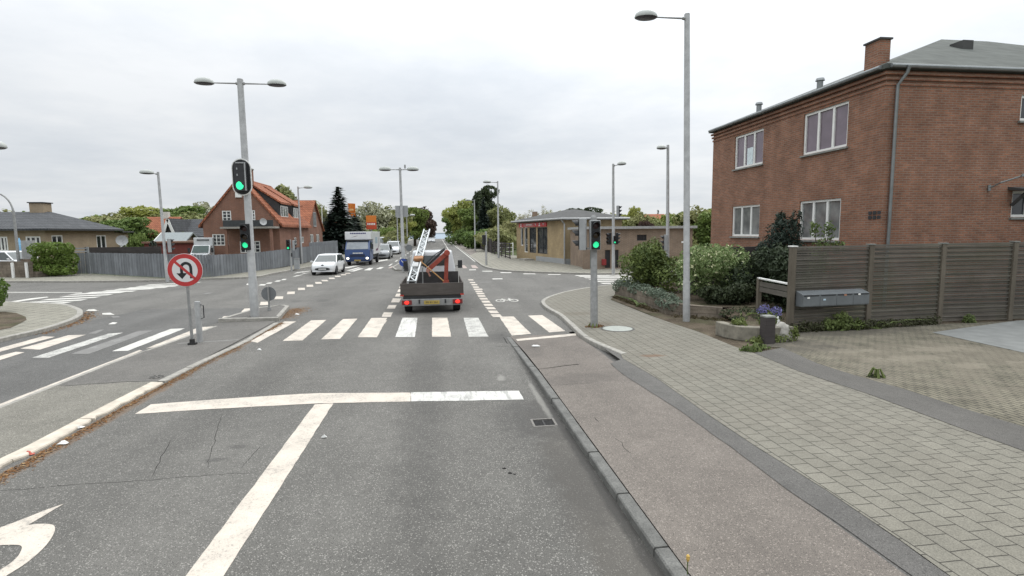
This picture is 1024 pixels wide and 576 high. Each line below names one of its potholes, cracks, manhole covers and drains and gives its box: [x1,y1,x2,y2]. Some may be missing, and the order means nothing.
crack [17,417,260,490]
drain grate [530,418,558,427]
